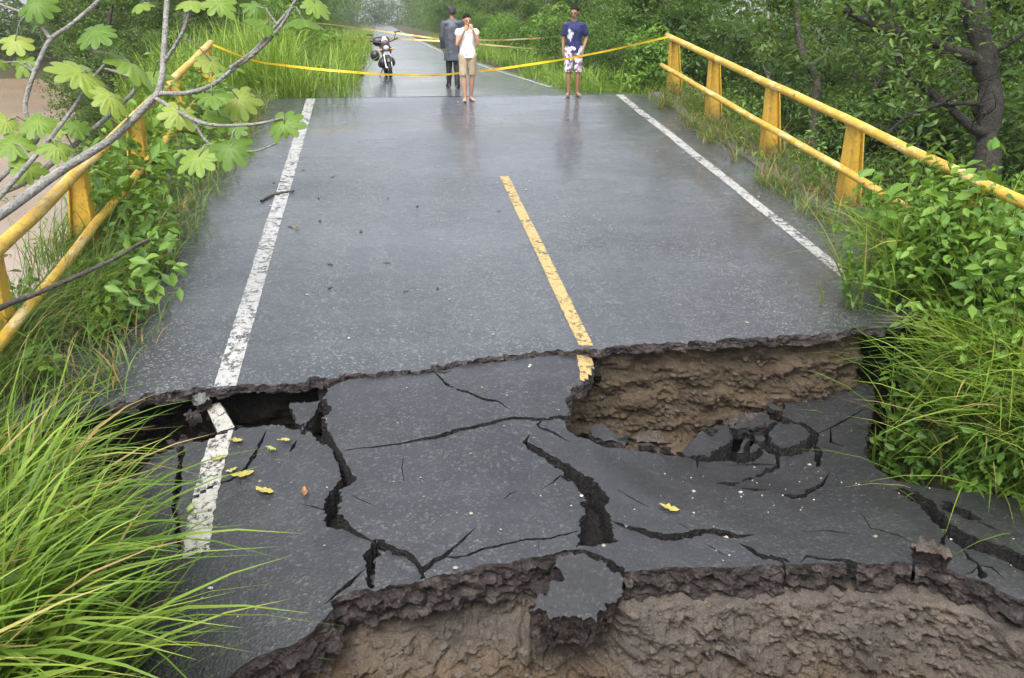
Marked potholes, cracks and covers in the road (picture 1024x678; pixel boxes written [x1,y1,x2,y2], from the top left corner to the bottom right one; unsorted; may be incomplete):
crack [288,357,1024,614]
